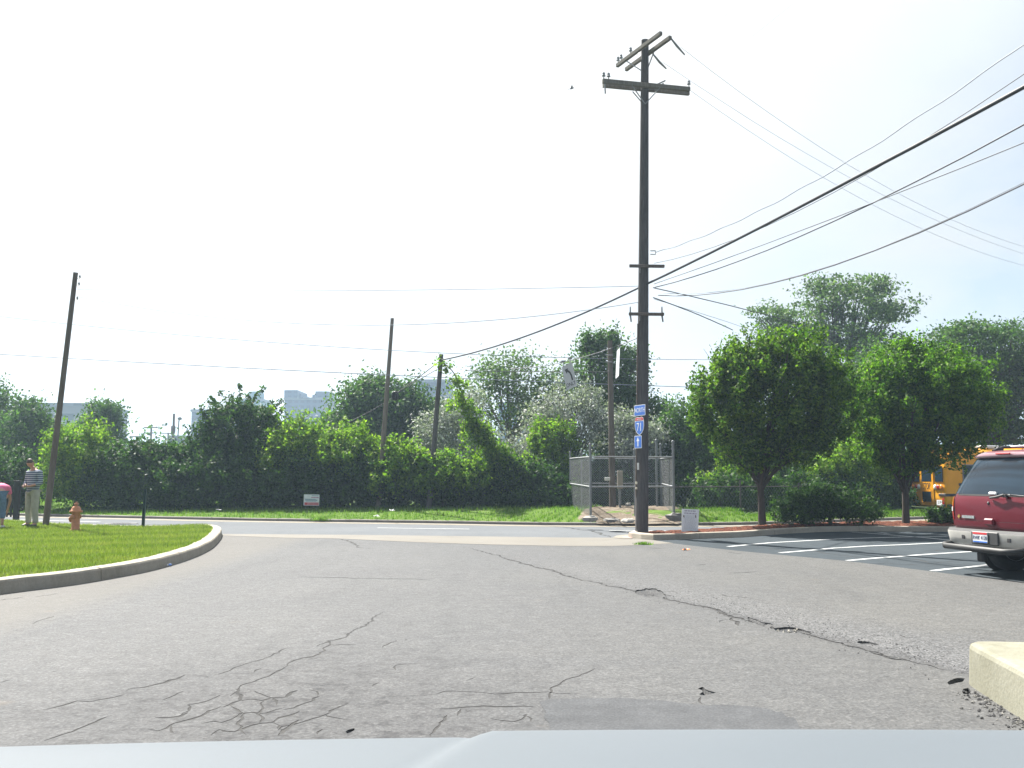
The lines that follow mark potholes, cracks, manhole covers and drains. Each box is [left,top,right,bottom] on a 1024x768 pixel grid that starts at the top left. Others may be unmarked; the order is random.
crack [429,668,595,737]
crack [37,612,407,740]
